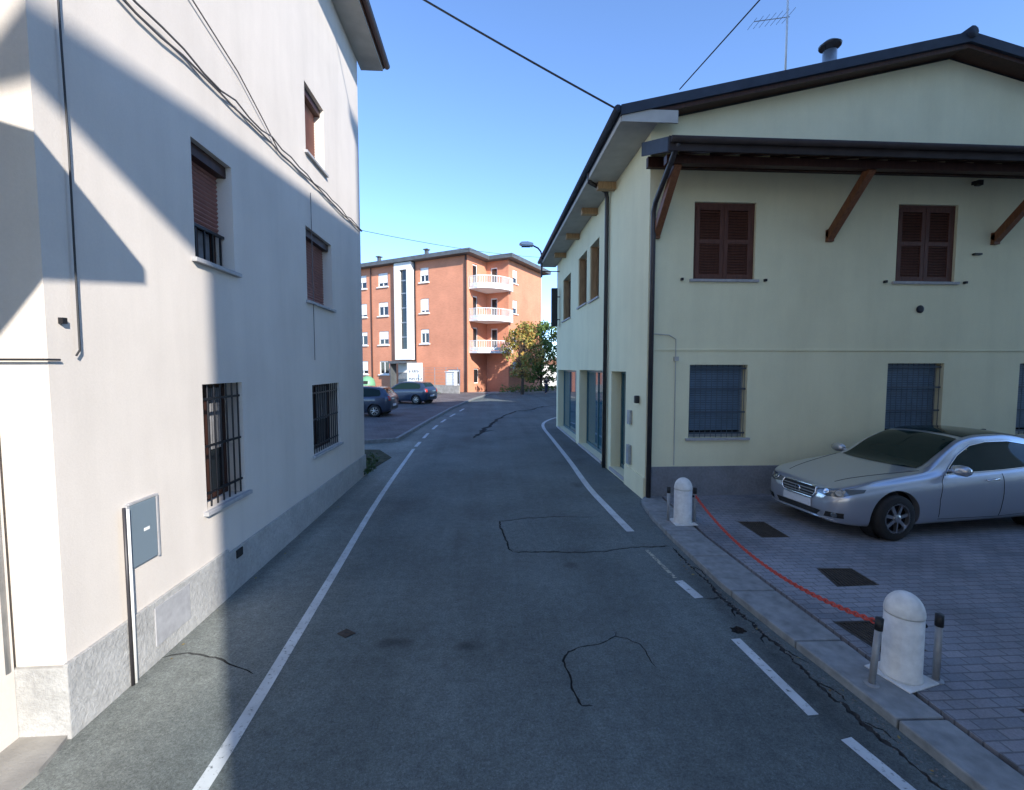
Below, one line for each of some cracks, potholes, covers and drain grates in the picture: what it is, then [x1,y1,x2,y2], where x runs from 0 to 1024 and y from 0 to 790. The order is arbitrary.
crack [499,516,947,790]
drain grate [739,522,789,538]
drain grate [817,568,878,587]
crack [163,652,253,674]
